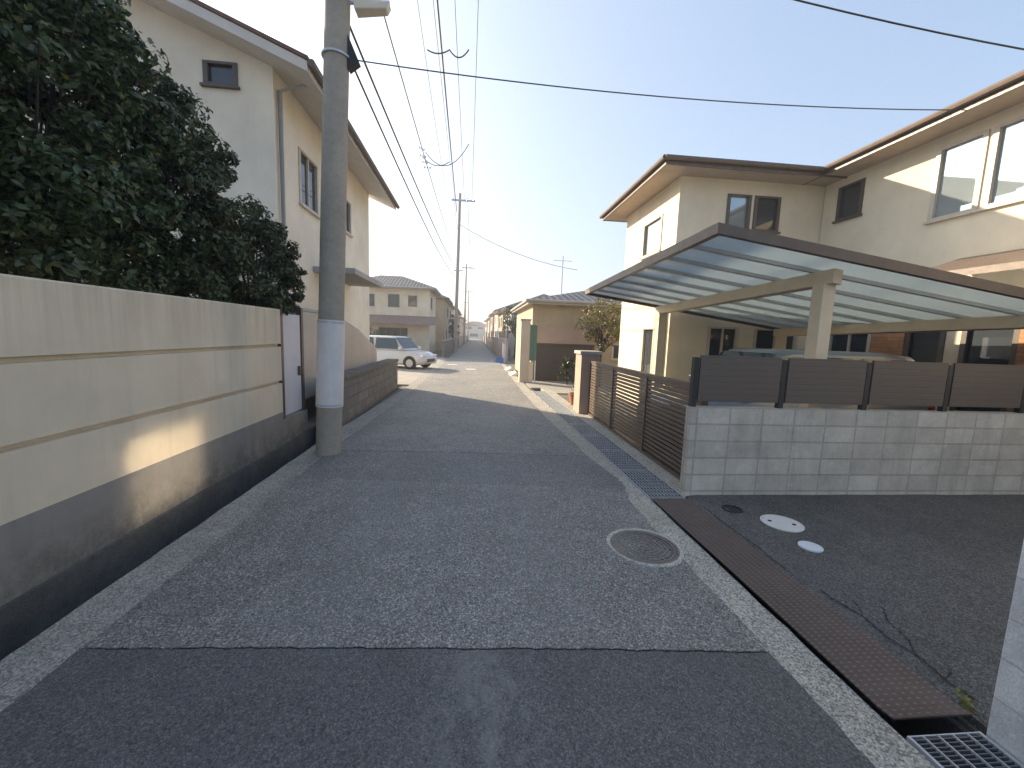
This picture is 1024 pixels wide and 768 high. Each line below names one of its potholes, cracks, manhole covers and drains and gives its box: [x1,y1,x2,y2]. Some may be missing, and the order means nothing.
drain grate [569,423,603,436]
crack [820,589,978,701]
manhole cover [606,528,684,568]
drain grate [906,731,1024,768]
drain grate [582,435,623,450]
drain grate [620,470,686,502]
drain grate [598,450,649,470]
utility cover [721,505,743,513]
drain grate [550,407,574,415]
drain grate [558,414,588,424]
